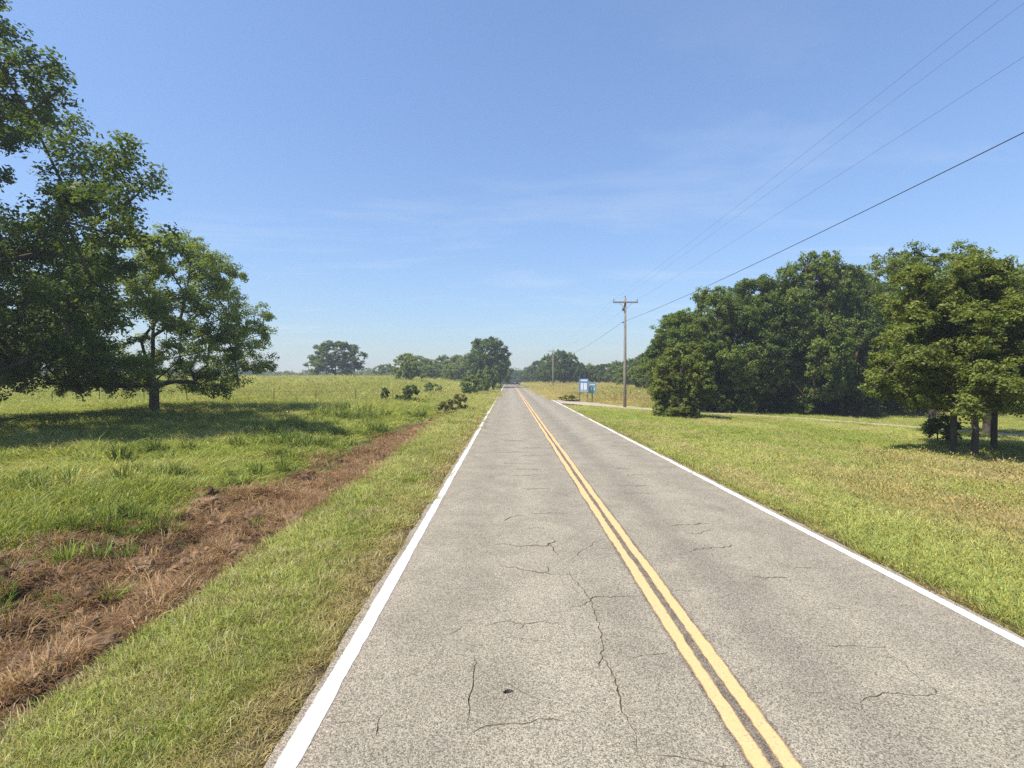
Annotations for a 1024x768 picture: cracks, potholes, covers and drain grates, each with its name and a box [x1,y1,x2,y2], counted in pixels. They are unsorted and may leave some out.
crack [673,523,738,552]
crack [467,652,576,733]
crack [487,440,664,767]
crack [824,644,956,704]
